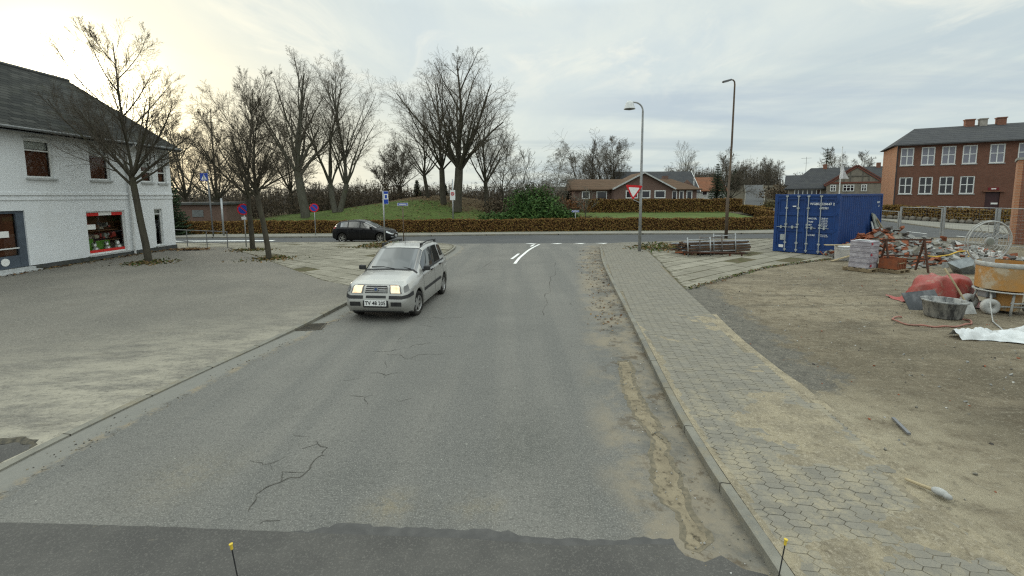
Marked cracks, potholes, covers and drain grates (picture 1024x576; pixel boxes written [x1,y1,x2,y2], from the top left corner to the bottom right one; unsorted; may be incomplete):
drain grate [296,323,327,331]
crack [248,435,328,524]
